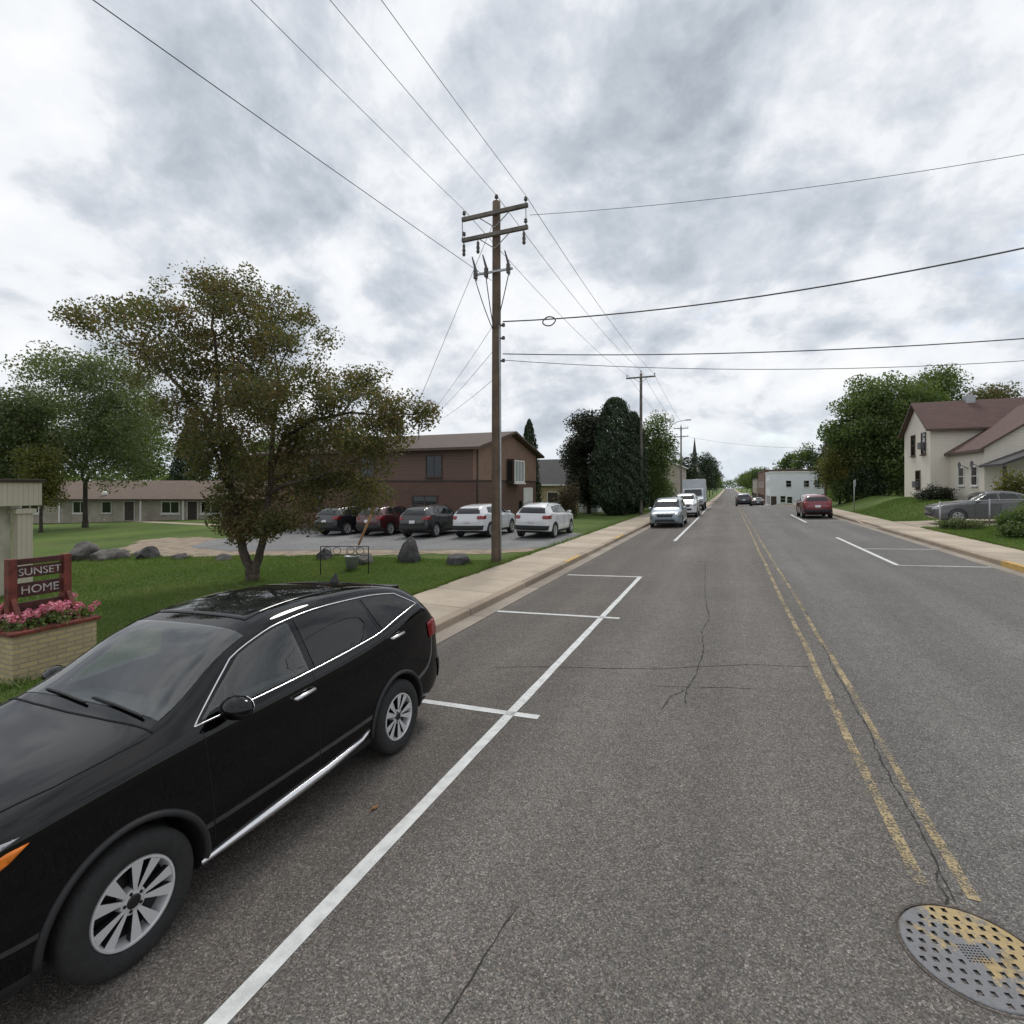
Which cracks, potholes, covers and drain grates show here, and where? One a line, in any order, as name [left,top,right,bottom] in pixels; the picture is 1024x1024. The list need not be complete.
crack [441,906,518,1024]
crack [533,563,807,707]
crack [935,869,949,905]
manhole cover [894,903,1024,1020]
